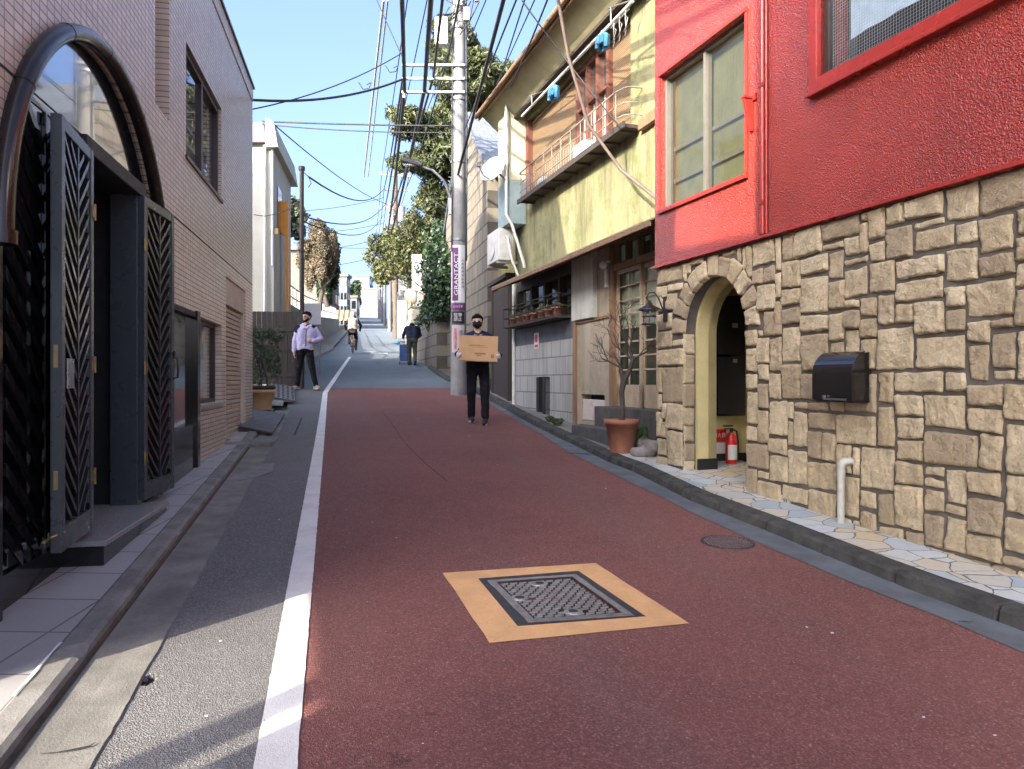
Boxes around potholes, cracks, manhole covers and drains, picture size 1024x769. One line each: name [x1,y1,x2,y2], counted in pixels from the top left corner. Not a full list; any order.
manhole cover [700,535,755,550]
manhole cover [443,563,688,643]
